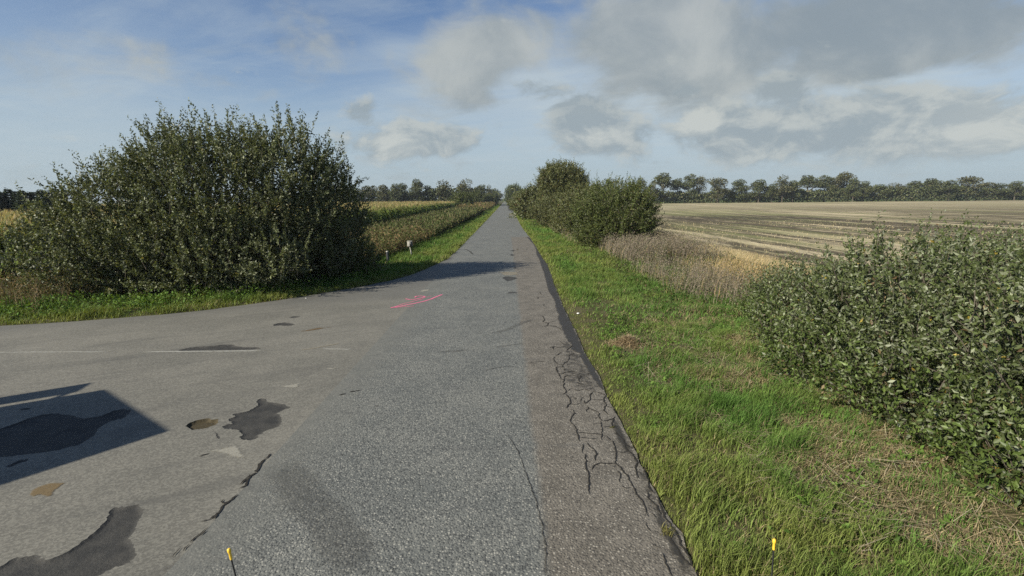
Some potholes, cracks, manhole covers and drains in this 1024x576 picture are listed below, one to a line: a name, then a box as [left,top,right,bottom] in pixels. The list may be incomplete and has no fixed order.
crack [173,454,270,556]
crack [488,293,698,575]
pothole [186,418,218,430]
